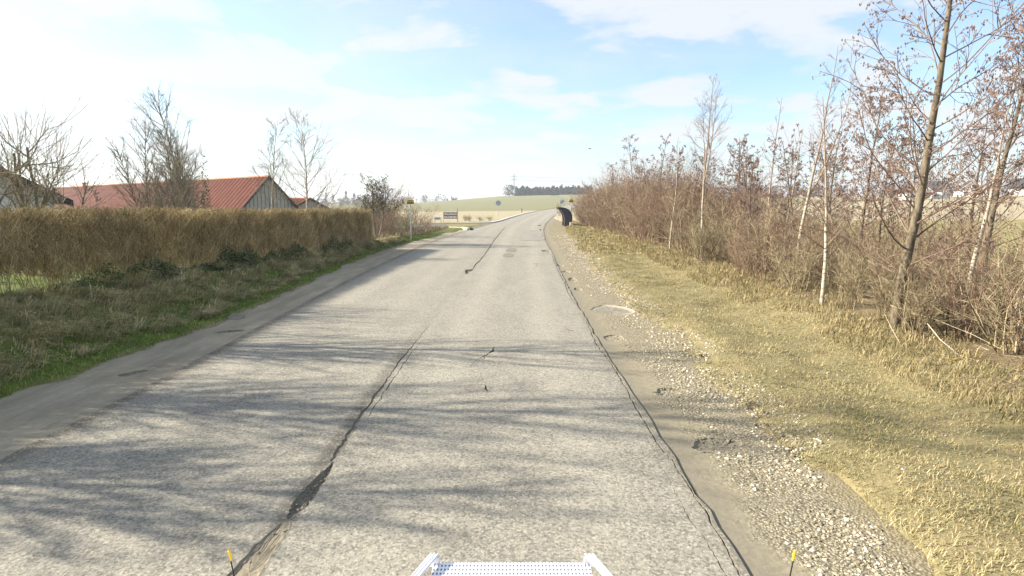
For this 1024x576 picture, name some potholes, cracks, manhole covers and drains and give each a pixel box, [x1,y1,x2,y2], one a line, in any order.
crack [473,228,505,268]
pothole [692,437,747,453]
pothole [653,388,682,397]
crack [330,326,428,461]
crack [567,321,741,576]
